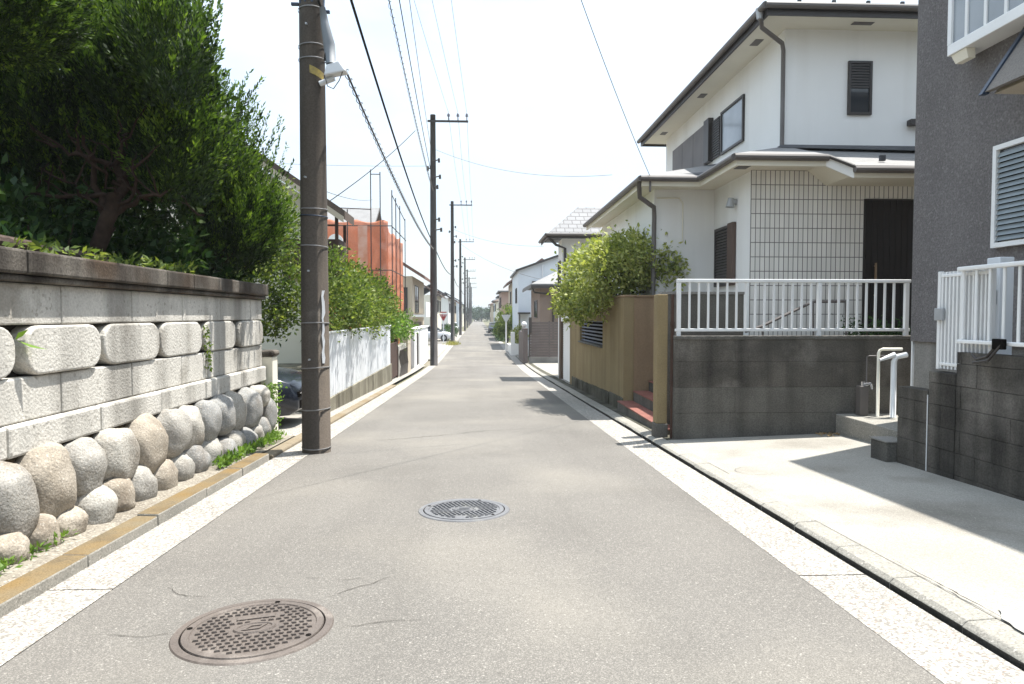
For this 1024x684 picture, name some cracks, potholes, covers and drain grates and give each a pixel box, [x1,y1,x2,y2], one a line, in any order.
manhole cover [169,599,334,666]
manhole cover [418,499,510,522]
